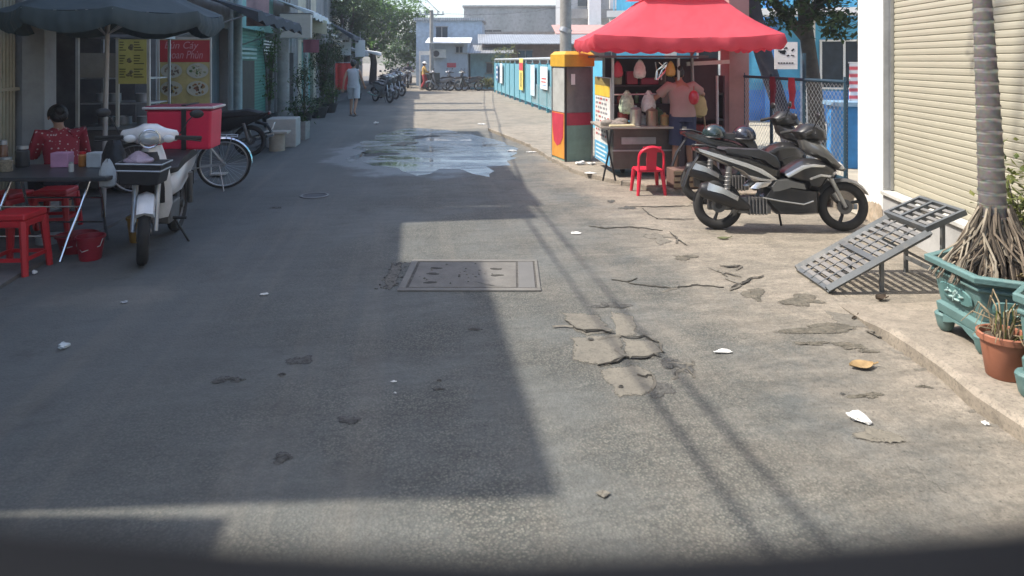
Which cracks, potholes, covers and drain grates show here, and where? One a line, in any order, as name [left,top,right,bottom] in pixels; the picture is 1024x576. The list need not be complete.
crack [590,226,688,245]
manhole cover [374,259,541,292]
pothole [286,355,312,364]
crack [611,264,764,292]
pothole [385,261,402,289]
crack [553,319,695,389]
pothole [661,357,694,373]
pothole [274,452,294,464]
pothole [336,416,362,424]
pothole [650,383,675,399]
